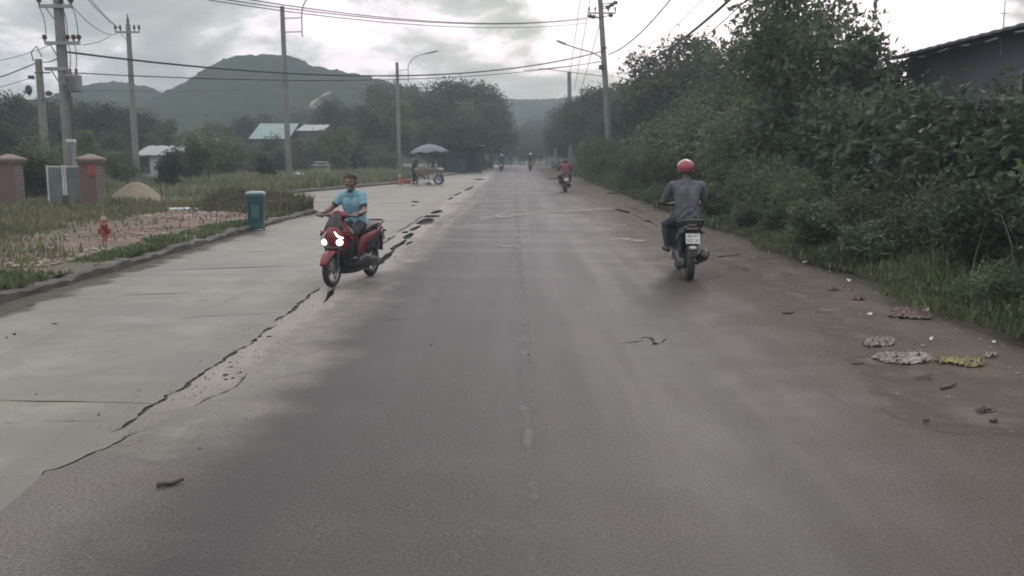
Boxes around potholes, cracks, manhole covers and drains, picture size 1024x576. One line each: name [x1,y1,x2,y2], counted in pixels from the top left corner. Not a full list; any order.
crack [621,336,666,345]
crack [41,288,320,475]
